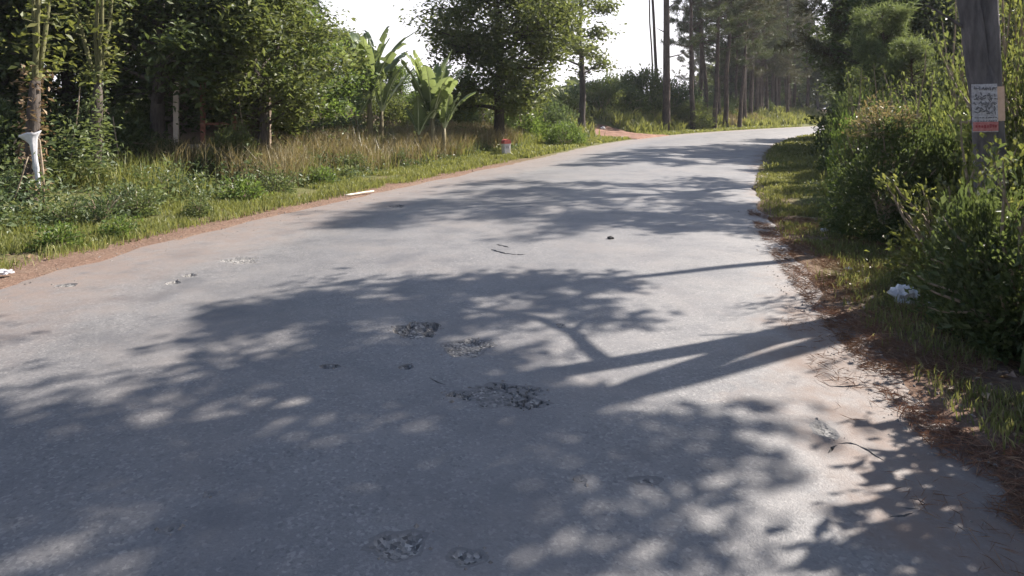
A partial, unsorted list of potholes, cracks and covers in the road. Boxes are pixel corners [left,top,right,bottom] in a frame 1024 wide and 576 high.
pothole [627,476,664,486]
pothole [445,546,489,568]
pothole [440,337,498,358]
pothole [361,529,430,563]
pothole [392,322,441,340]
